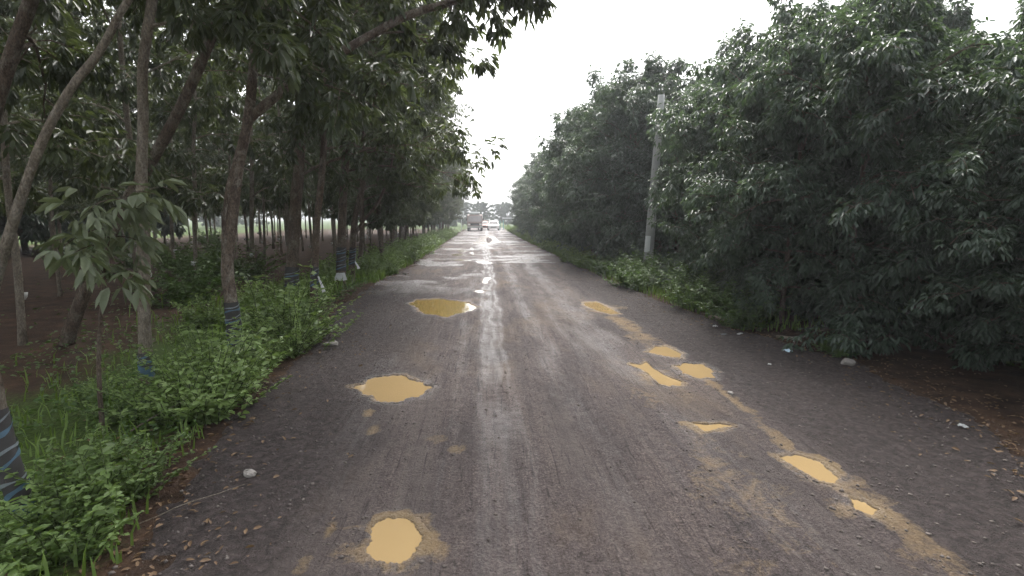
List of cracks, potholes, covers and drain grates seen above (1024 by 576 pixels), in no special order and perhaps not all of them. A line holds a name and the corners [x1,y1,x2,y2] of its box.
pothole [582,301,621,315]
pothole [643,345,686,359]
pothole [686,421,739,433]
pothole [355,511,433,571]
pothole [772,451,847,489]
pothole [670,361,719,380]
pothole [627,361,686,388]
pothole [841,493,891,520]
pothole [406,298,481,318]
pothole [349,373,438,404]
